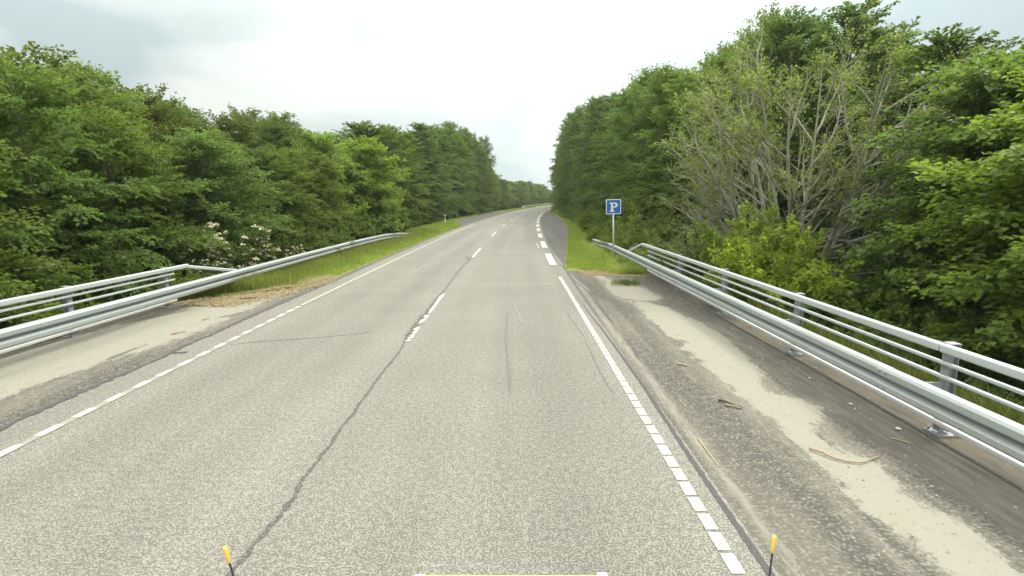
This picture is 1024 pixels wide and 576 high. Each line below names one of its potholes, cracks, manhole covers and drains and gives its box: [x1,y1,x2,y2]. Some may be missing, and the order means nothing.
crack [225,244,472,576]
